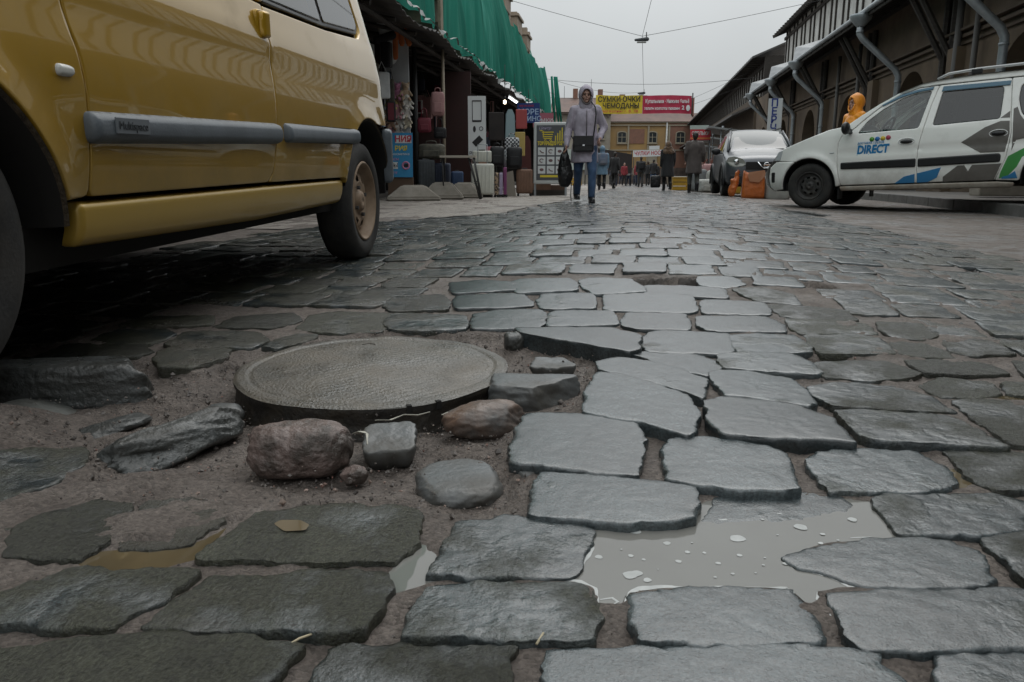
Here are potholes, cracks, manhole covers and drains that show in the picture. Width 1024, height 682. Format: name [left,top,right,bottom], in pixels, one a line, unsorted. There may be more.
manhole cover [233,336,508,442]
